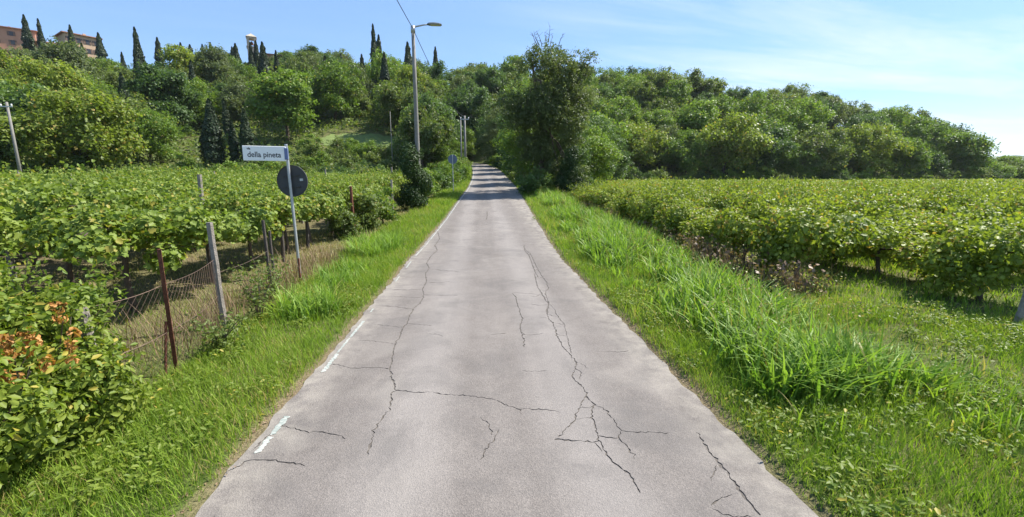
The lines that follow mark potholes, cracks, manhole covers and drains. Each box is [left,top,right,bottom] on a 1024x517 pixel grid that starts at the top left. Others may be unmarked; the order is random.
crack [226,426,345,472]
crack [333,231,558,454]
crack [491,246,667,493]
crack [696,432,761,517]
